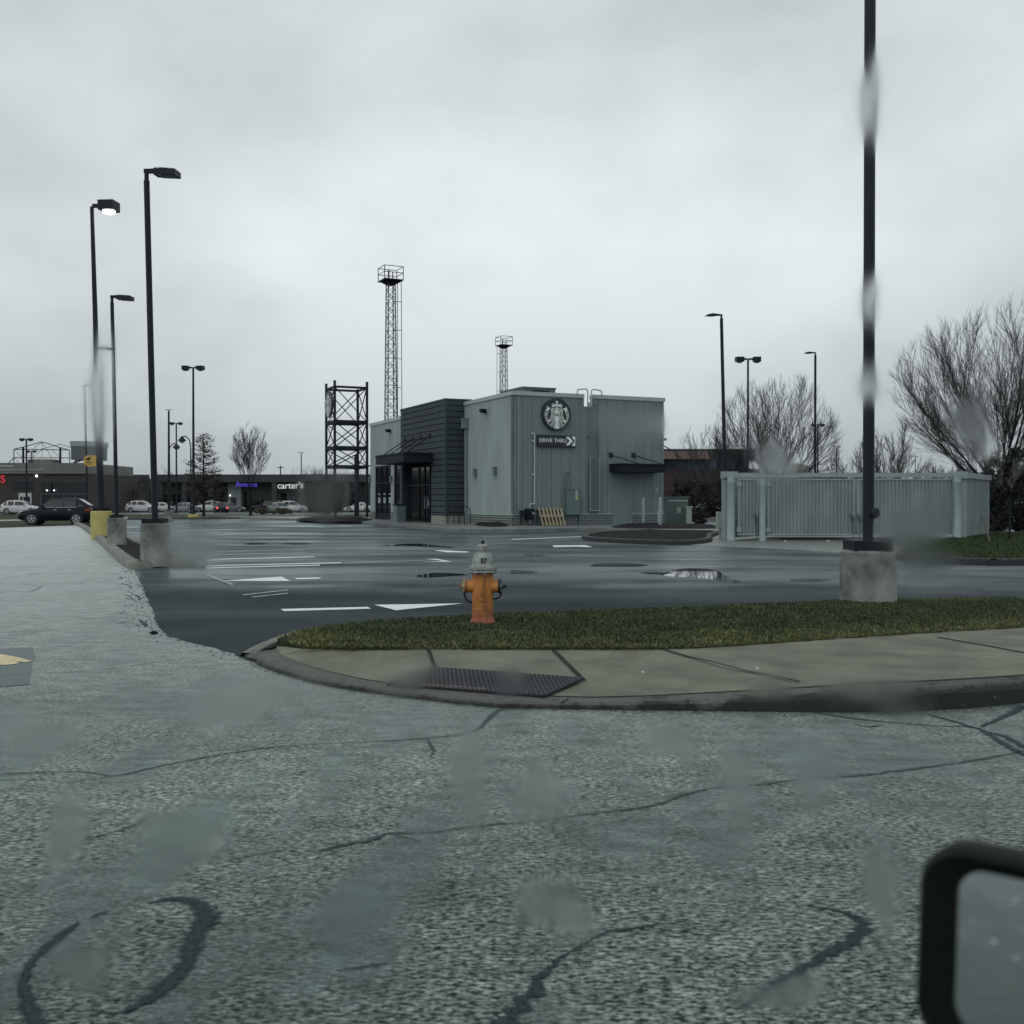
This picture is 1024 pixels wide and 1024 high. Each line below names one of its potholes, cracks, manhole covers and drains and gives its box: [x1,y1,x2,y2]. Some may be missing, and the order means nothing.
crack [317,750,1024,851]
crack [337,923,658,1024]
crack [0,707,506,781]
